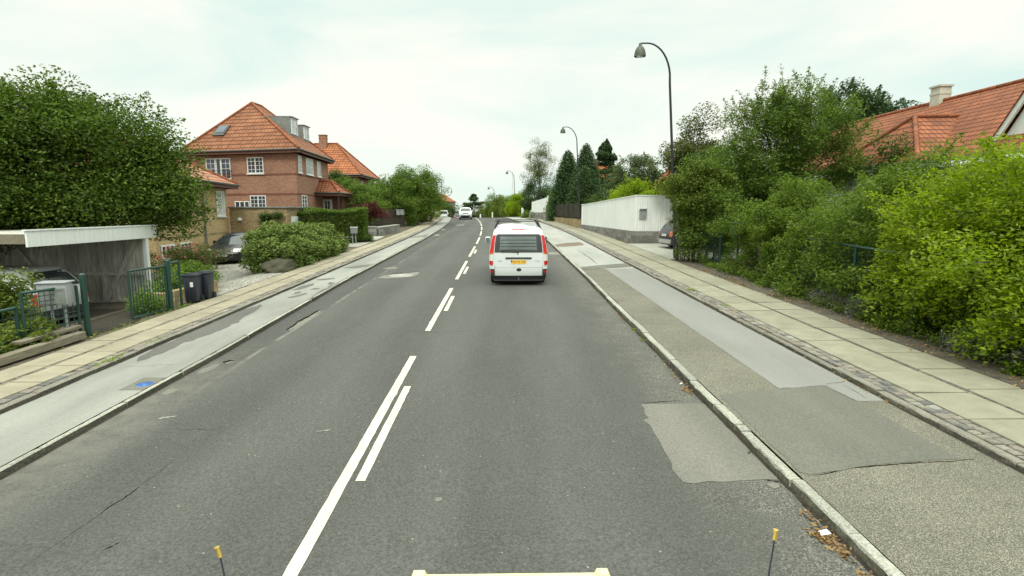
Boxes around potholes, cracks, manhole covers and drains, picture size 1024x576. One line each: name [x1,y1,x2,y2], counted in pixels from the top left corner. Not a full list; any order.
crack [35,465,167,559]
